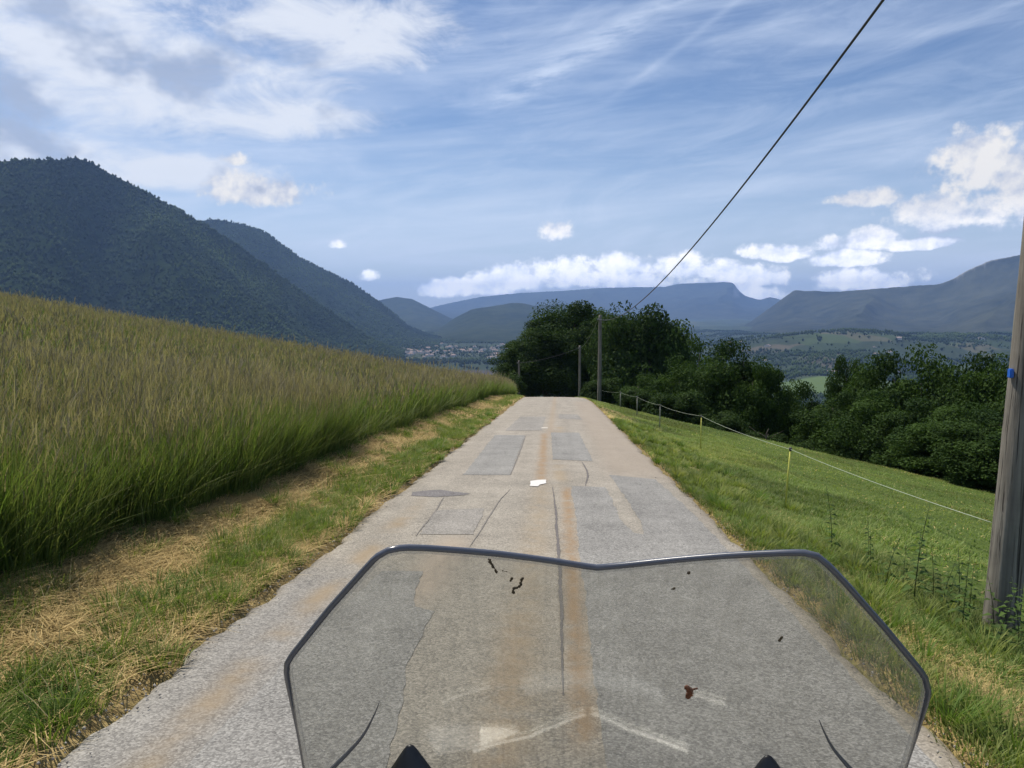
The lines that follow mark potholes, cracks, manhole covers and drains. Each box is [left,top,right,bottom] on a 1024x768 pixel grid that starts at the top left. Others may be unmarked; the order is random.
crack [469,496,503,547]
crack [552,487,564,695]
